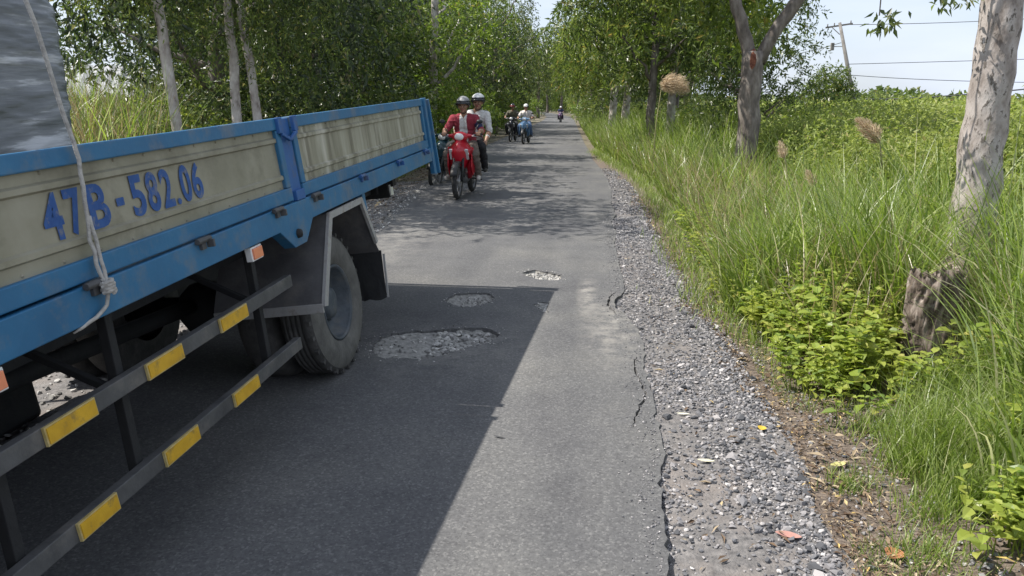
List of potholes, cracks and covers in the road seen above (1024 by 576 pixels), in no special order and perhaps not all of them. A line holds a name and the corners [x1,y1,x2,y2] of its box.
crack [633,359,647,427]
pothole [355,323,516,364]
pothole [441,291,500,308]
pothole [517,269,568,281]
pothole [534,301,550,312]
